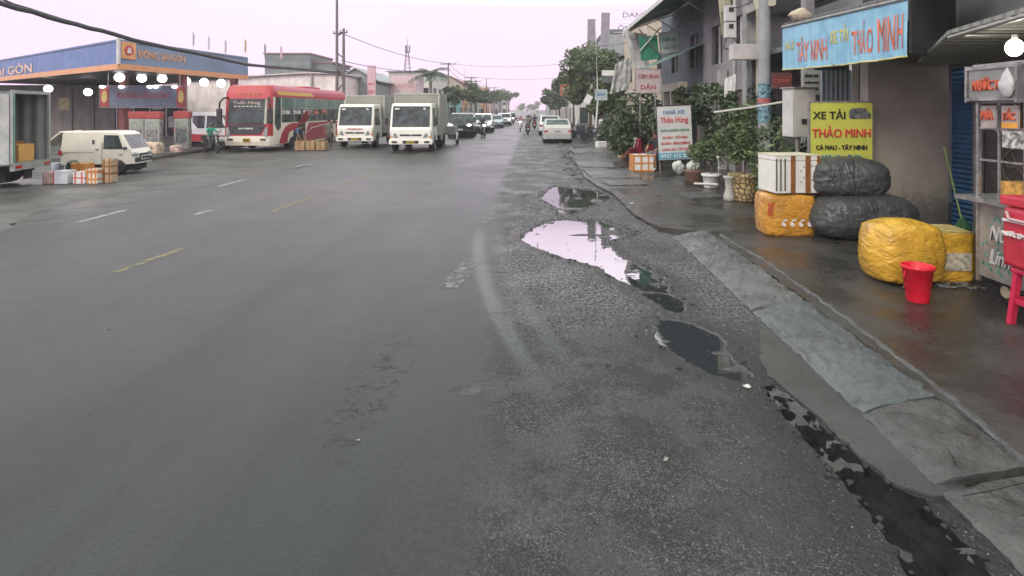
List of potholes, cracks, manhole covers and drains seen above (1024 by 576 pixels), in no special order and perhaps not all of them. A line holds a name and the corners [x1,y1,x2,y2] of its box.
pothole [635,316,754,381]
pothole [536,185,613,218]
crack [962,482,1024,508]
pothole [514,215,694,313]
pothole [761,381,990,576]
